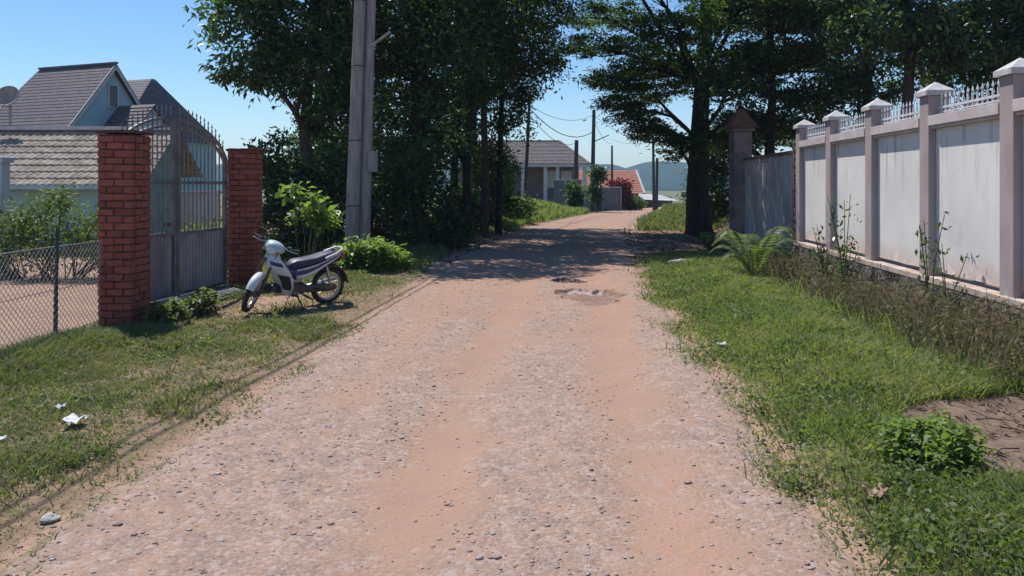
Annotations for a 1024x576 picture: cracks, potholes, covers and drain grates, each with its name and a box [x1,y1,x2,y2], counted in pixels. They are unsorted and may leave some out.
pothole [551,287,630,307]
